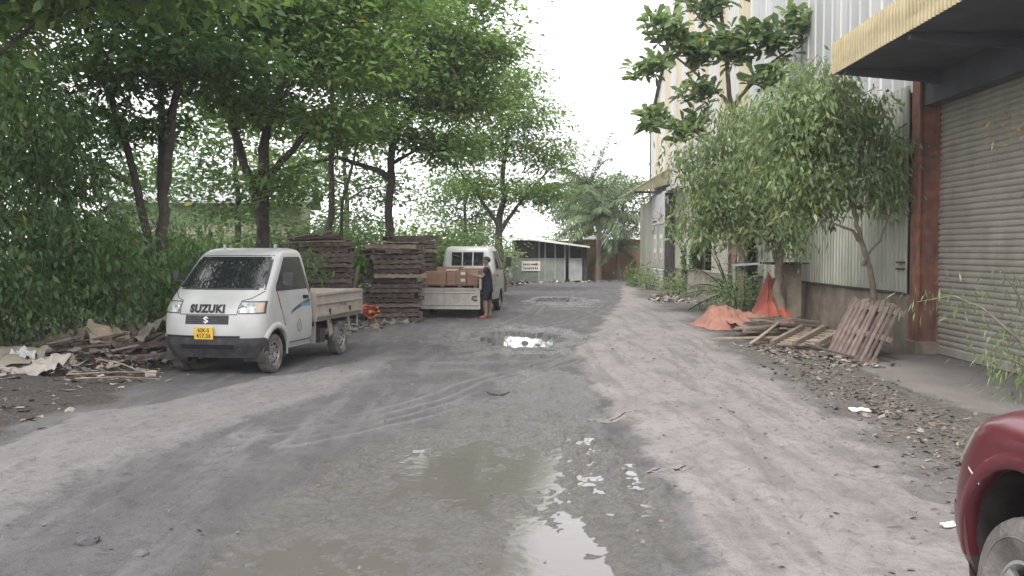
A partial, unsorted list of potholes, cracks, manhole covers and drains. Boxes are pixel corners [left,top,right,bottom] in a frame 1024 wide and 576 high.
pothole [453,330,583,350]
